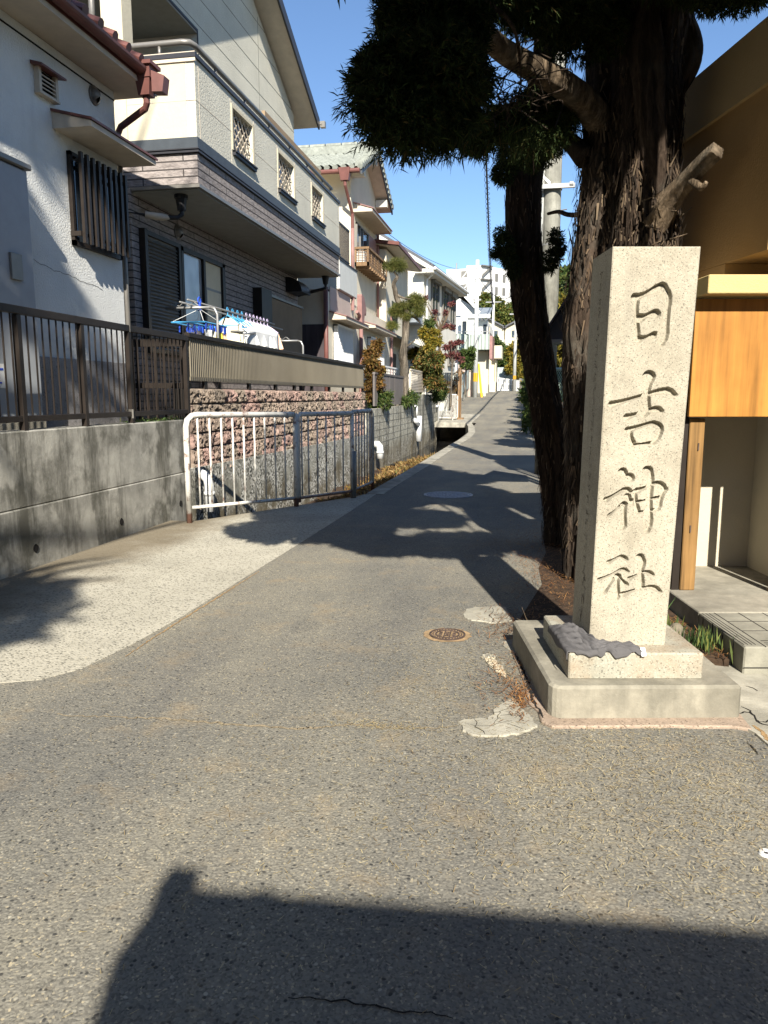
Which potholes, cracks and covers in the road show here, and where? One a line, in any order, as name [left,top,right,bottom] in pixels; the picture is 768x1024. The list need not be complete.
manhole cover [423,628,472,642]
crack [741,686,768,754]
crack [288,996,453,1019]
manhole cover [424,491,473,499]
